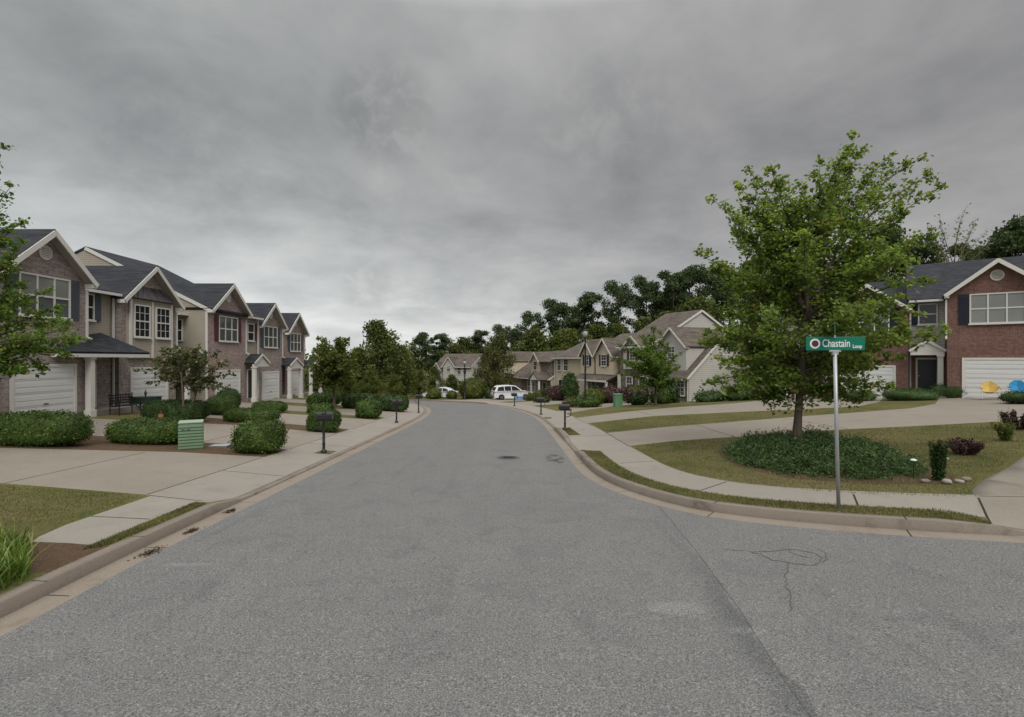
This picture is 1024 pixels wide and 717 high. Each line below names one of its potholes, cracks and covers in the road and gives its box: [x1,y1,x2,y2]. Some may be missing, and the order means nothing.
crack [724,548,827,611]
